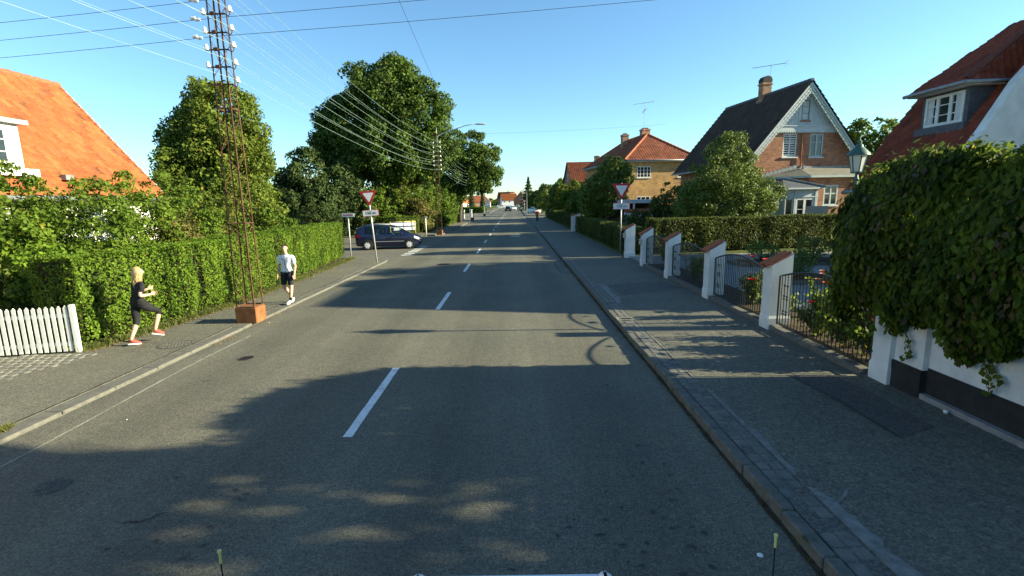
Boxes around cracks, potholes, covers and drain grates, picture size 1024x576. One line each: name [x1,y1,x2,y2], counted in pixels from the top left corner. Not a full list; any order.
crack [122,513,164,524]
manhole cover [32,477,73,495]
